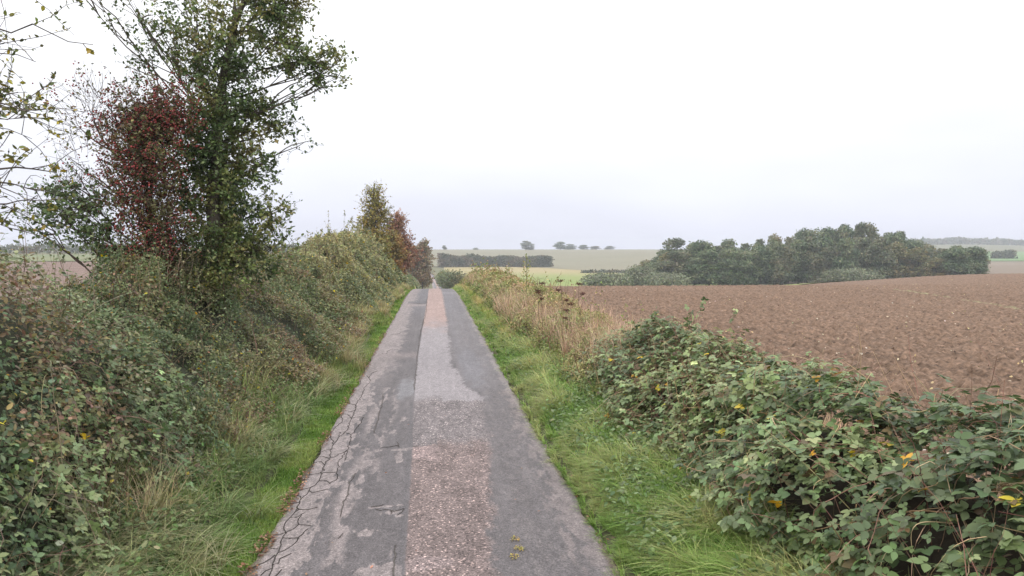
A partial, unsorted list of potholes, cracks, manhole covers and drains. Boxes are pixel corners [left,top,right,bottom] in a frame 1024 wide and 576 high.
crack [253,372,399,576]
